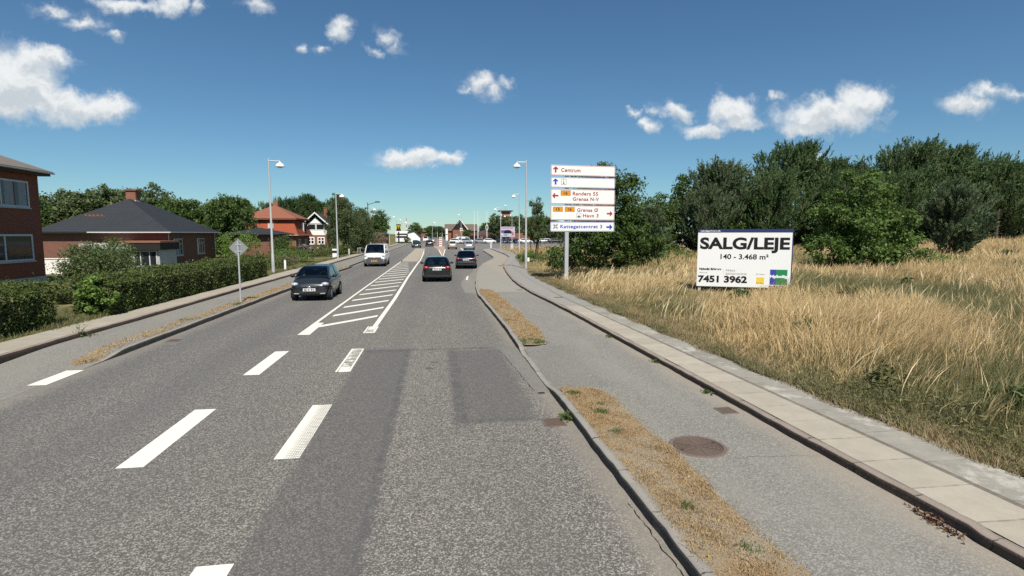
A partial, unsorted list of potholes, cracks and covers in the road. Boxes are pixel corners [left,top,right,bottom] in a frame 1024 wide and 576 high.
crack [628,503,684,576]
manhole cover [669,435,728,458]
